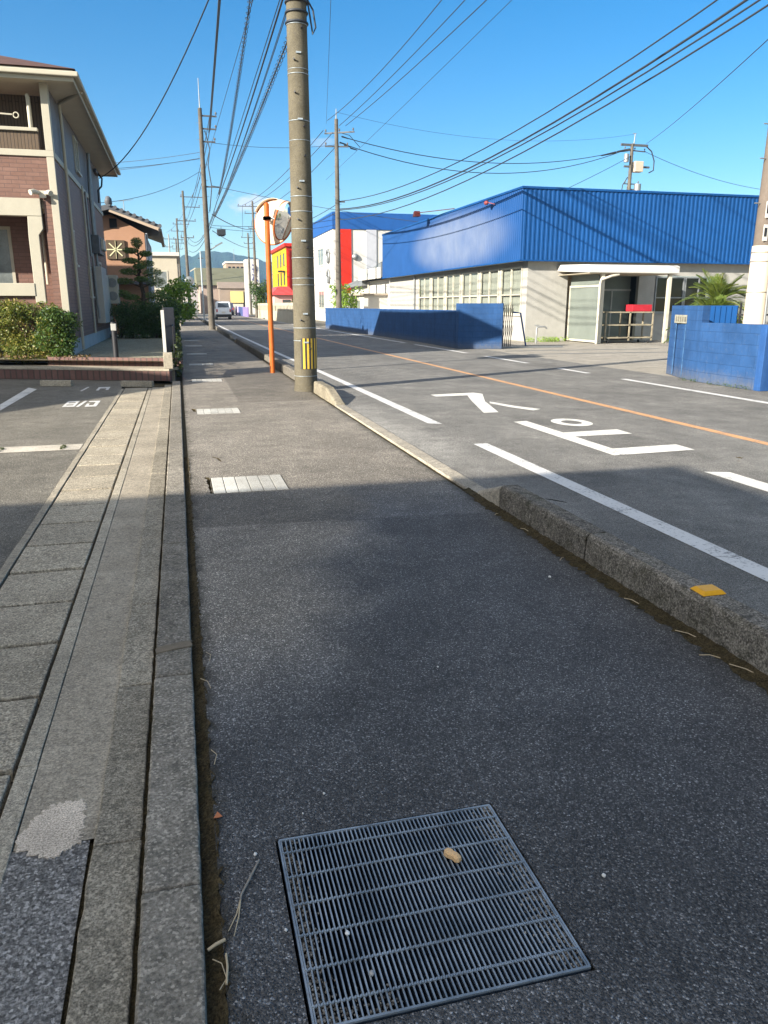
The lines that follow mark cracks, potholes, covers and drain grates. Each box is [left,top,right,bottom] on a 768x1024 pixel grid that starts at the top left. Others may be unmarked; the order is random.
drain grate [277,804,591,1024]
